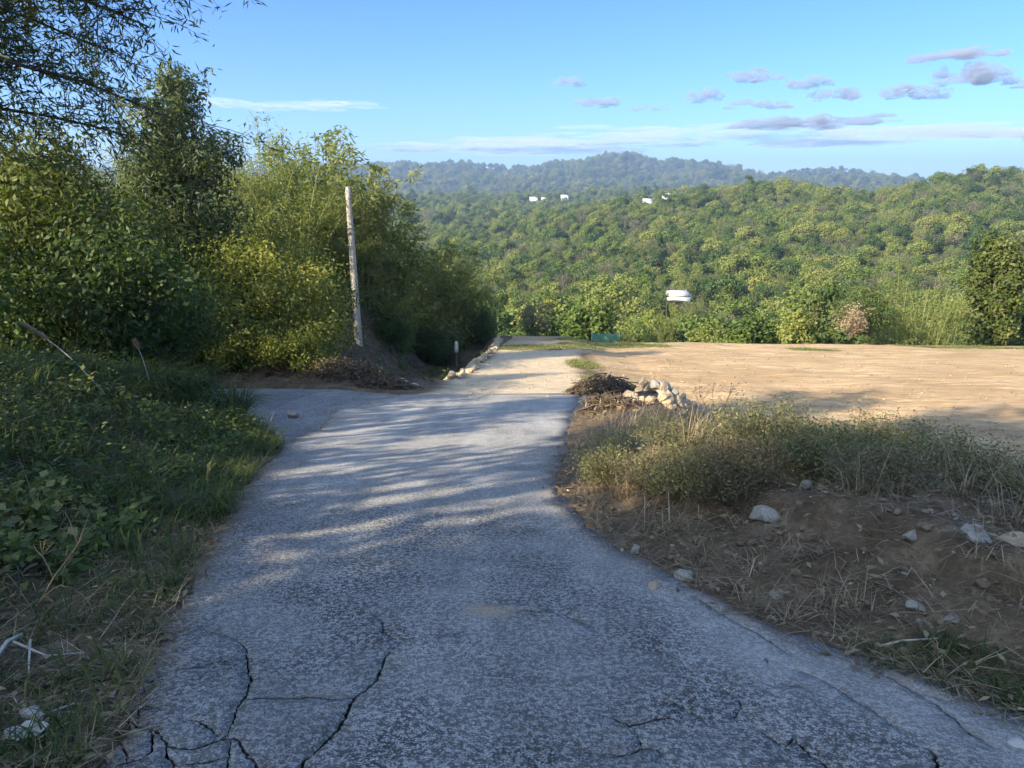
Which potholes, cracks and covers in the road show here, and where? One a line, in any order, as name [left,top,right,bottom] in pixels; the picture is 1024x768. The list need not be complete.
crack [761,732,827,768]
crack [589,705,698,757]
crack [119,614,409,768]
